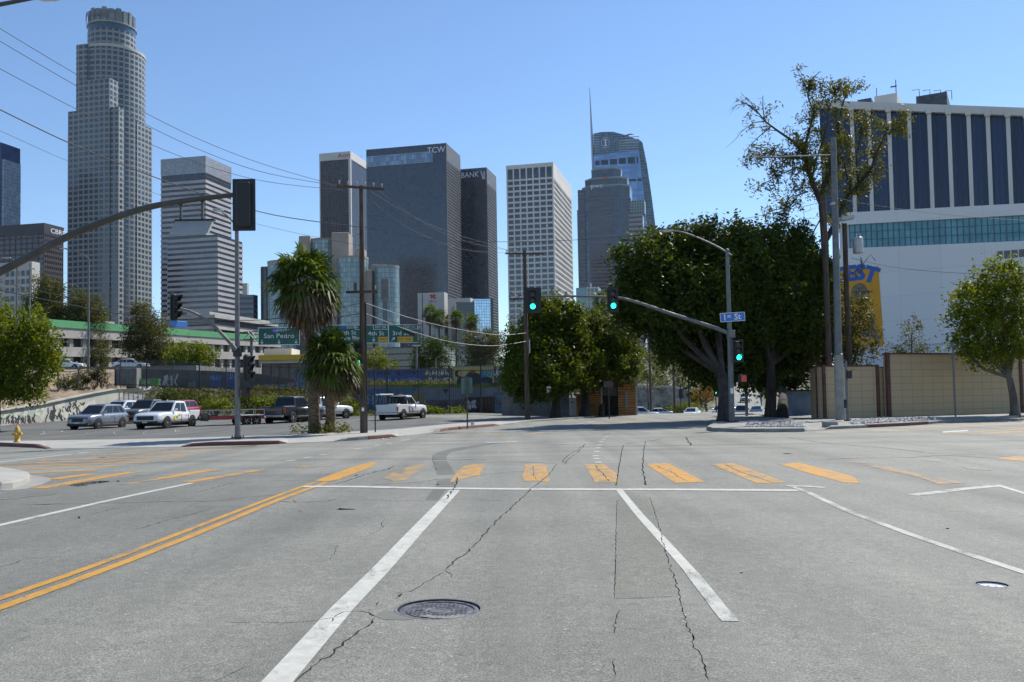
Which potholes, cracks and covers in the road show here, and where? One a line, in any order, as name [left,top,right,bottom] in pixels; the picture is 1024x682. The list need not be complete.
crack [226,446,584,682]
crack [641,441,708,679]
manhole cover [394,598,484,620]
